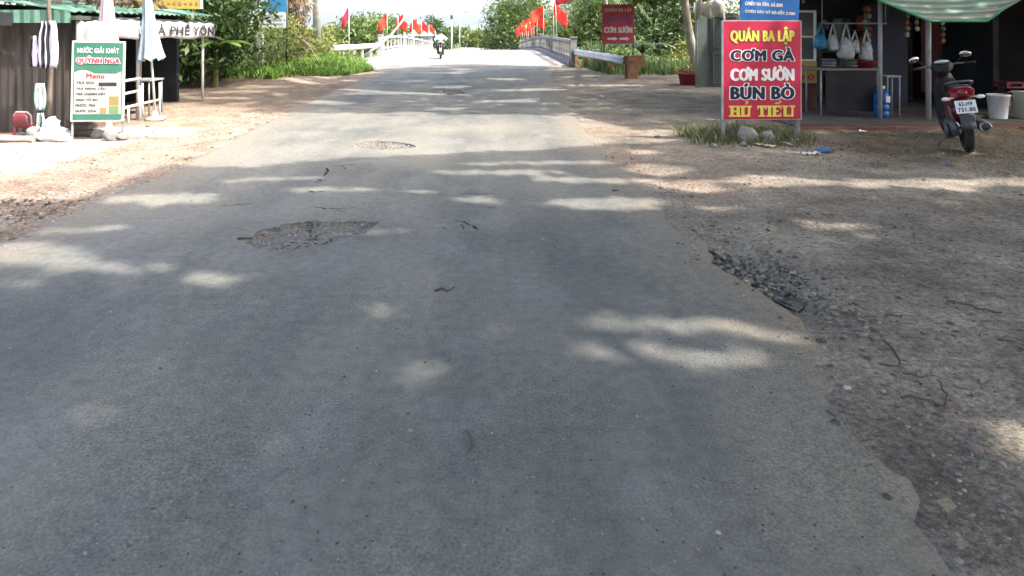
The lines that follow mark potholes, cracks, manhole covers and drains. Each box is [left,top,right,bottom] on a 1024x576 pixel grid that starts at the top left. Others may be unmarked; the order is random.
pothole [246,220,378,251]
crack [307,164,351,212]
pothole [708,248,808,311]
crack [442,193,496,231]
